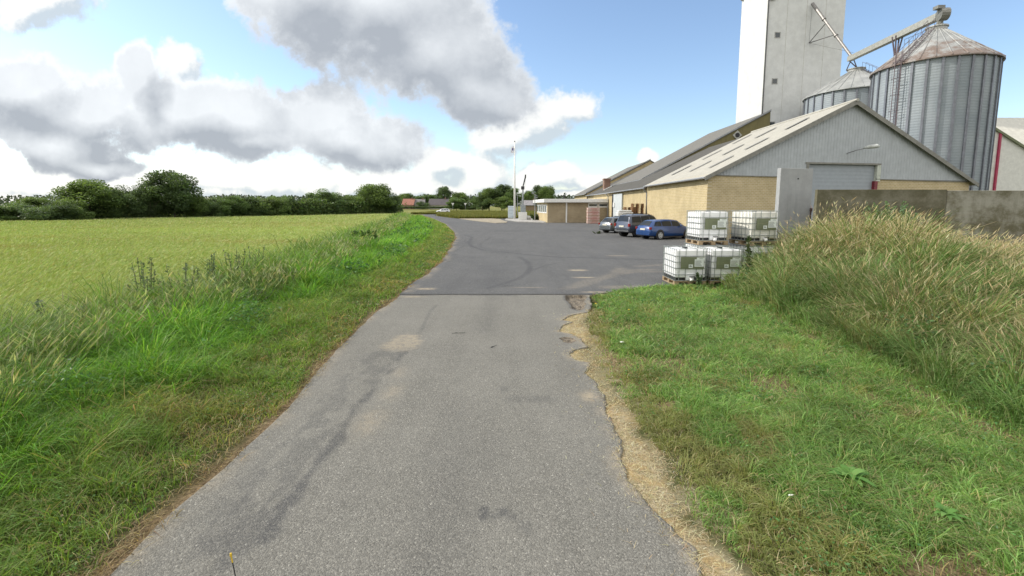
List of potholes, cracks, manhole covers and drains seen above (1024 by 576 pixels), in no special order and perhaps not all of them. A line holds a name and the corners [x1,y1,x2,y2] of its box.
pothole [565,295,587,311]
